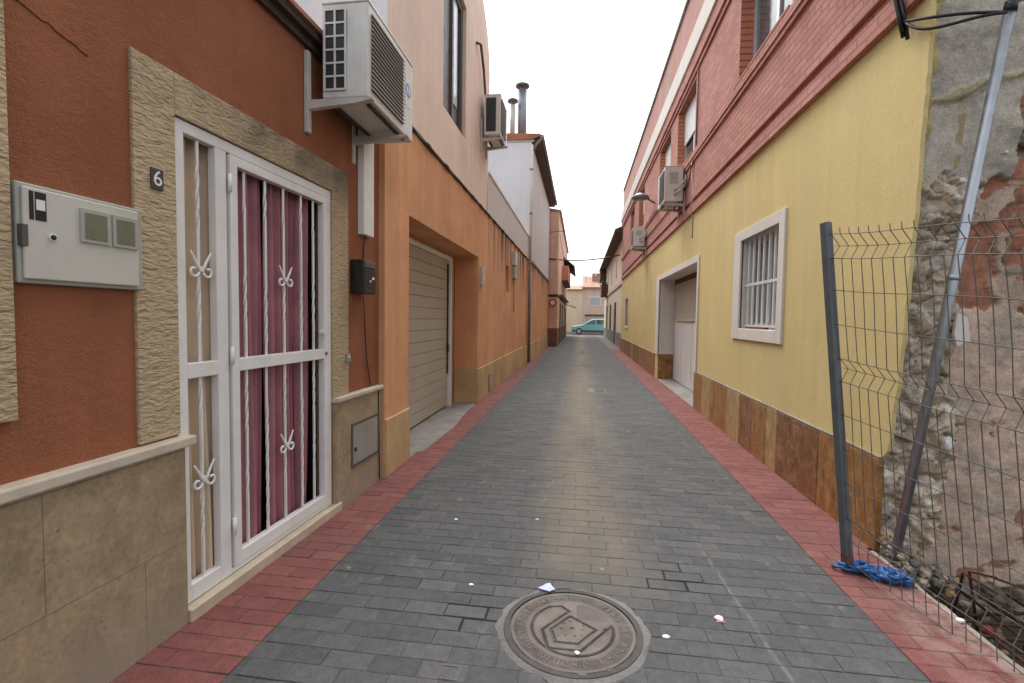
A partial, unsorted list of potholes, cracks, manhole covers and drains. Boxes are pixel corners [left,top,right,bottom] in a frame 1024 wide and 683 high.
manhole cover [495,589,651,683]
